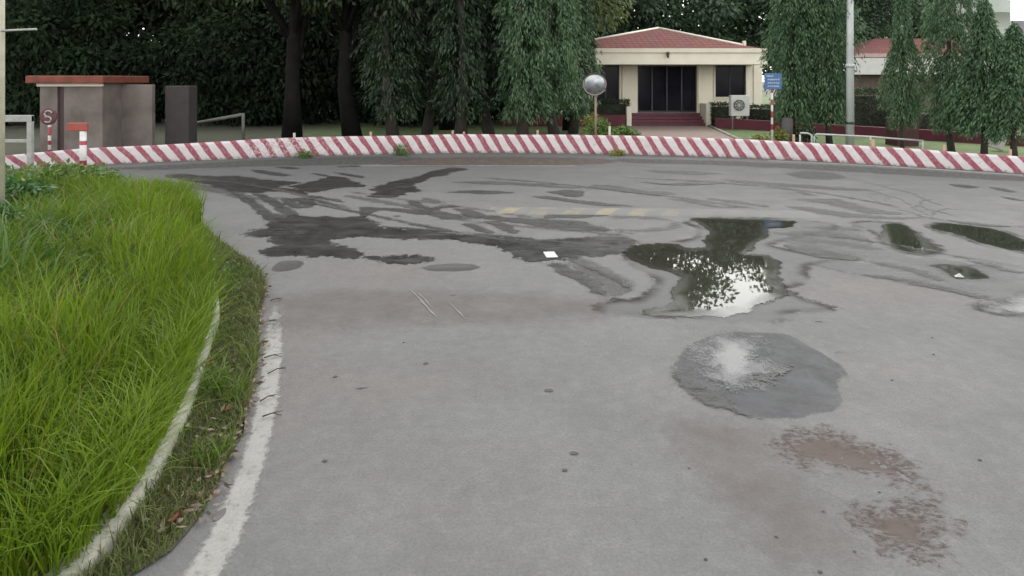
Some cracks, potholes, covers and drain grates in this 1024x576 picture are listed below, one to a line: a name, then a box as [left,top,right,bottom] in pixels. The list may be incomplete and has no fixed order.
pothole [916,221,1024,256]
crack [868,182,956,222]
pothole [584,217,865,326]
pothole [912,261,1005,283]
pothole [962,289,1024,320]
pothole [843,220,953,258]
